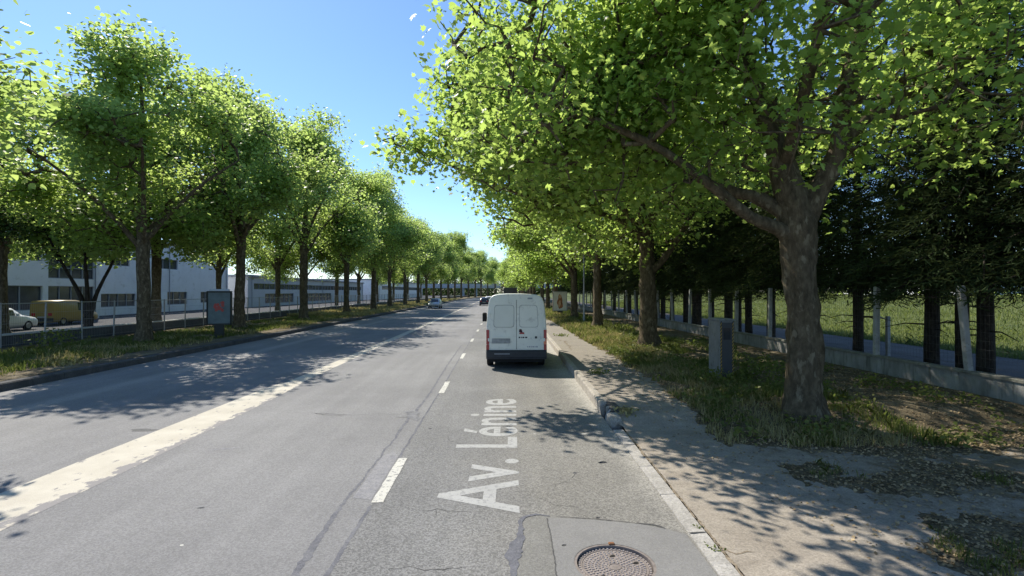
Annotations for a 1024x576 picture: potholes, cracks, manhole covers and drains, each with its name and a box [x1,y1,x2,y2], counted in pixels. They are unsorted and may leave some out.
manhole cover [574,542,657,576]
